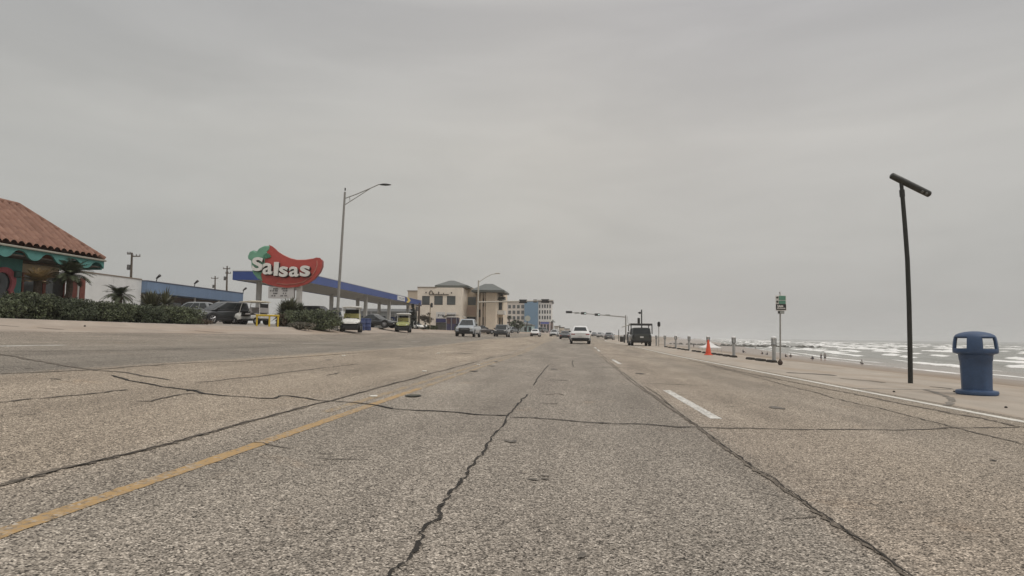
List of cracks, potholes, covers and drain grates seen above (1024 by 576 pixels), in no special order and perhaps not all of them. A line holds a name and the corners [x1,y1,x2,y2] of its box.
crack [0,354,1023,576]
